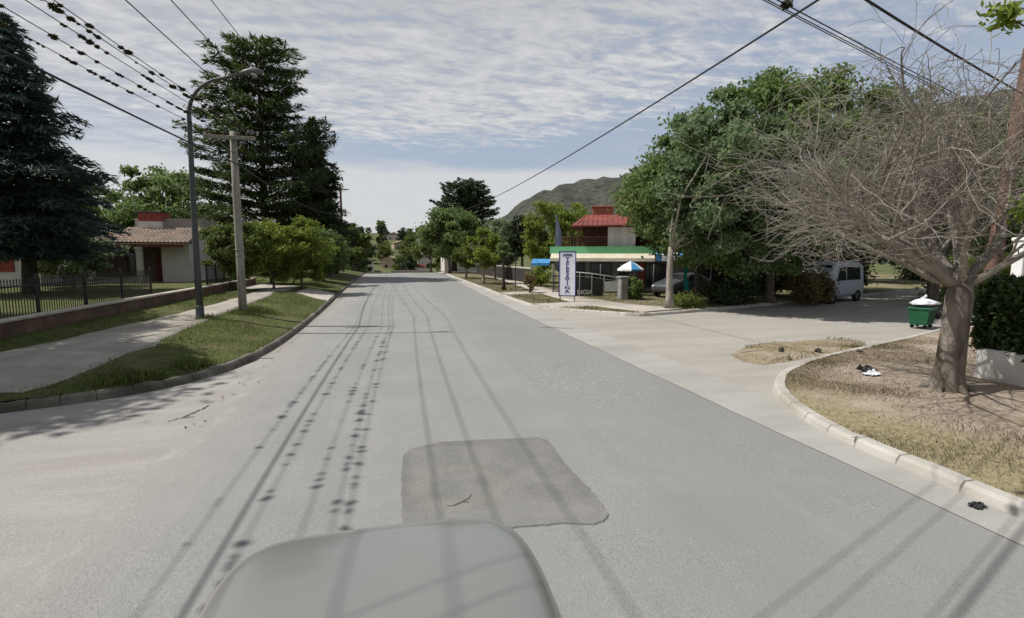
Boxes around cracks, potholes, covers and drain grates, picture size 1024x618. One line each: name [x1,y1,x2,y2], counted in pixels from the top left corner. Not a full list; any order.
crack [167,405,210,422]
crack [446,494,472,506]
